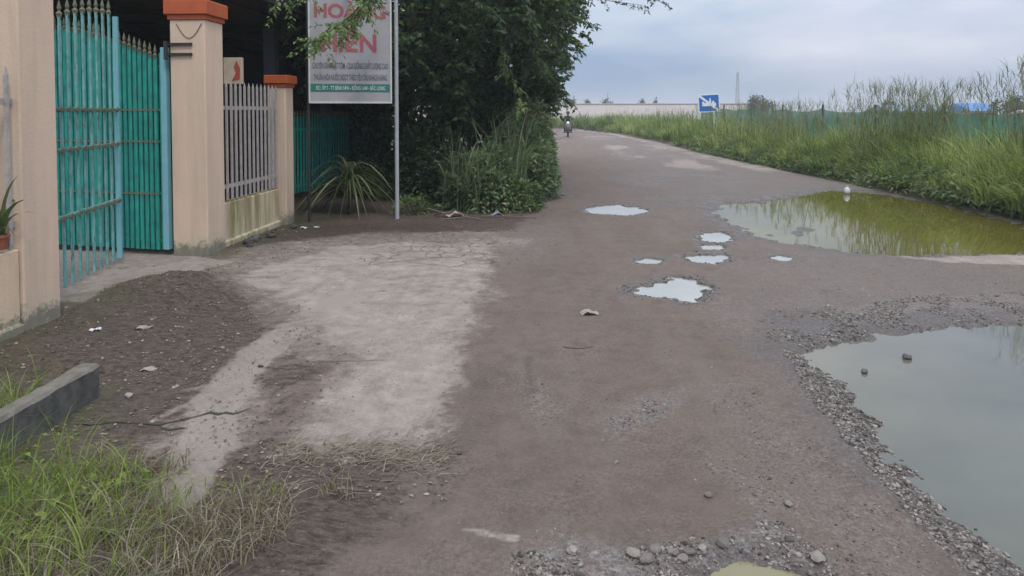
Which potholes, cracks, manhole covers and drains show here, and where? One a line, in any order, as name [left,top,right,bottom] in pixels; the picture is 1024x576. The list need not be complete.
pothole [675,250,739,265]
pothole [616,274,722,307]
pothole [625,254,670,265]
pothole [571,203,658,217]
crack [359,241,495,267]
pothole [753,309,1024,576]
pothole [694,186,1024,260]
pothole [671,537,841,576]
